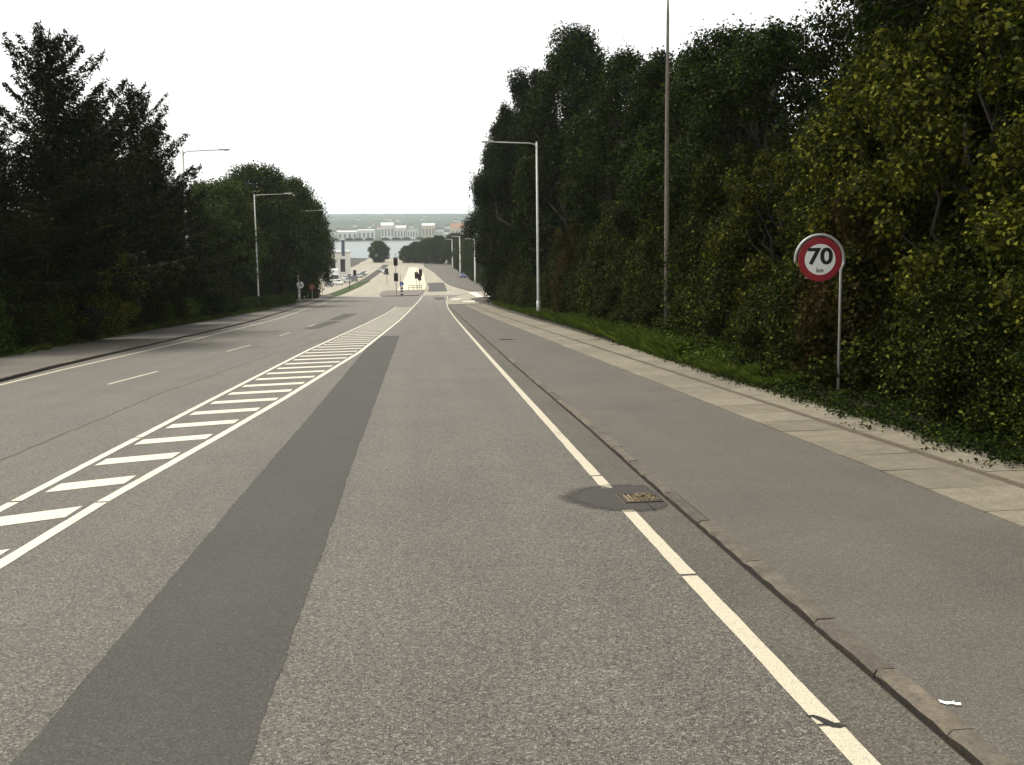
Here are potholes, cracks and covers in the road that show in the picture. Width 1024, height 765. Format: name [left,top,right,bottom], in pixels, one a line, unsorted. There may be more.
drain grate [618,492,664,504]
